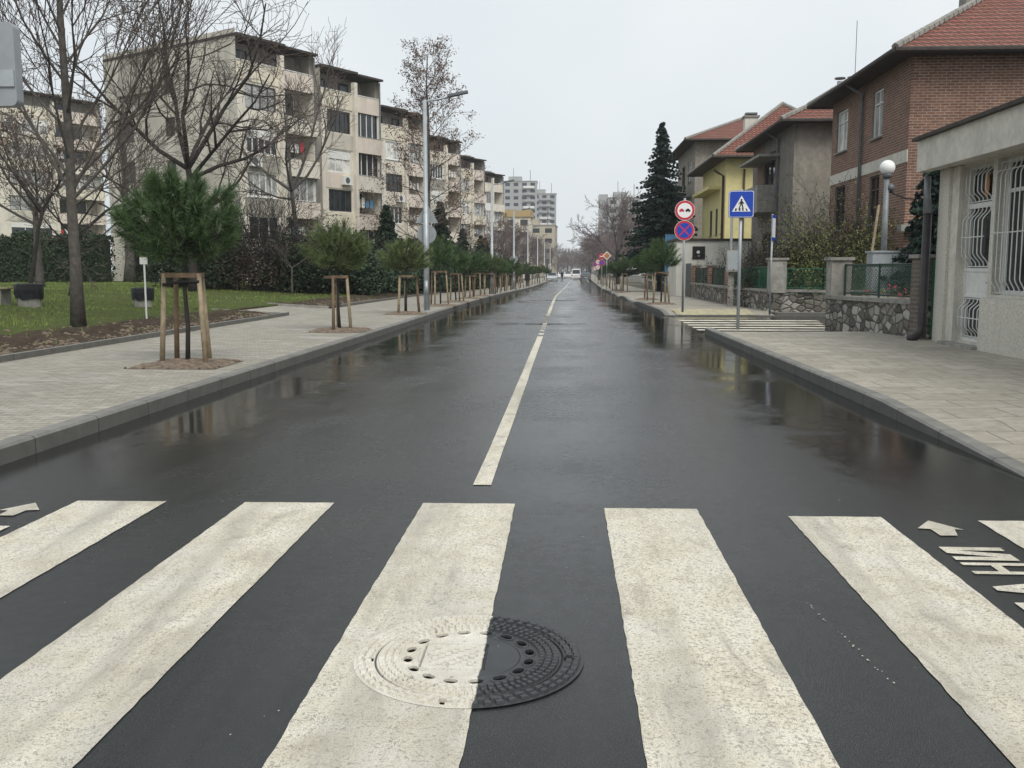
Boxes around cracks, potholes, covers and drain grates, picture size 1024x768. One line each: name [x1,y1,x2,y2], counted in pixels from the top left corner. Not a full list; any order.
manhole cover [353,615,584,709]
